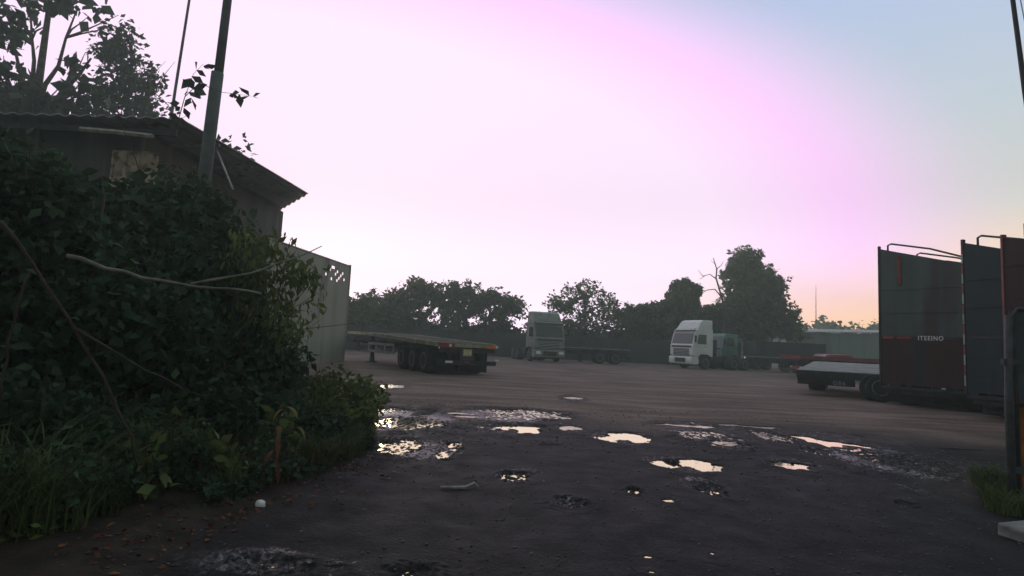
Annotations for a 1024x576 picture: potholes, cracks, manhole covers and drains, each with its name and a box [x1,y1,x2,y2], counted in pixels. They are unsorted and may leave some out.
pothole [375,414,470,434]
pothole [429,404,604,424]
pothole [480,466,546,489]
pothole [676,473,746,505]
pothole [361,381,420,392]
pothole [770,431,907,454]
pothole [550,422,593,436]
pothole [653,427,771,446]
pothole [533,491,605,514]
pothole [576,428,672,450]
